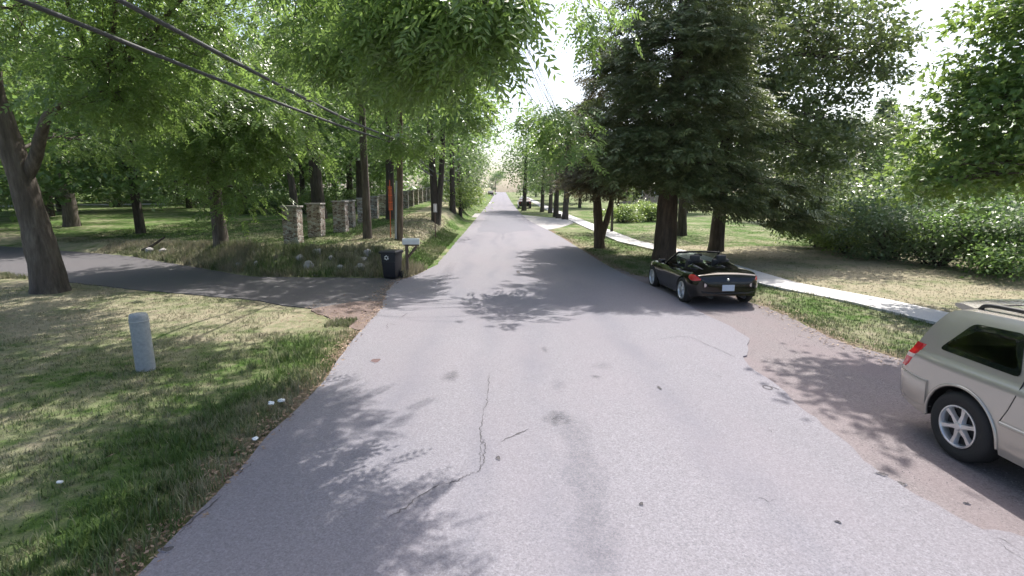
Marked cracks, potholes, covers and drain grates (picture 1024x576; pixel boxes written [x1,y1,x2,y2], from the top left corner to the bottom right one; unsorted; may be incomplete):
crack [388,377,526,518]
